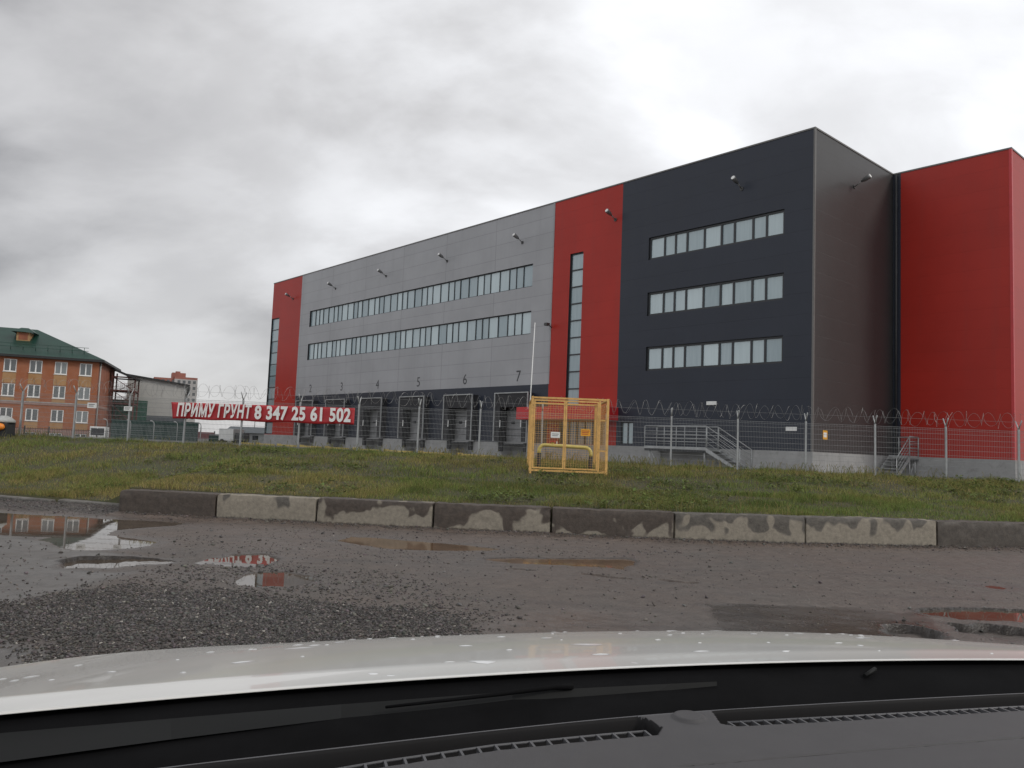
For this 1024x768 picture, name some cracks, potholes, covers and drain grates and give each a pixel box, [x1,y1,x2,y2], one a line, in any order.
pothole [909,607,1024,624]
pothole [481,556,640,570]
pothole [230,570,320,588]
pothole [53,555,177,569]
pothole [879,623,956,640]
pothole [213,553,284,567]
